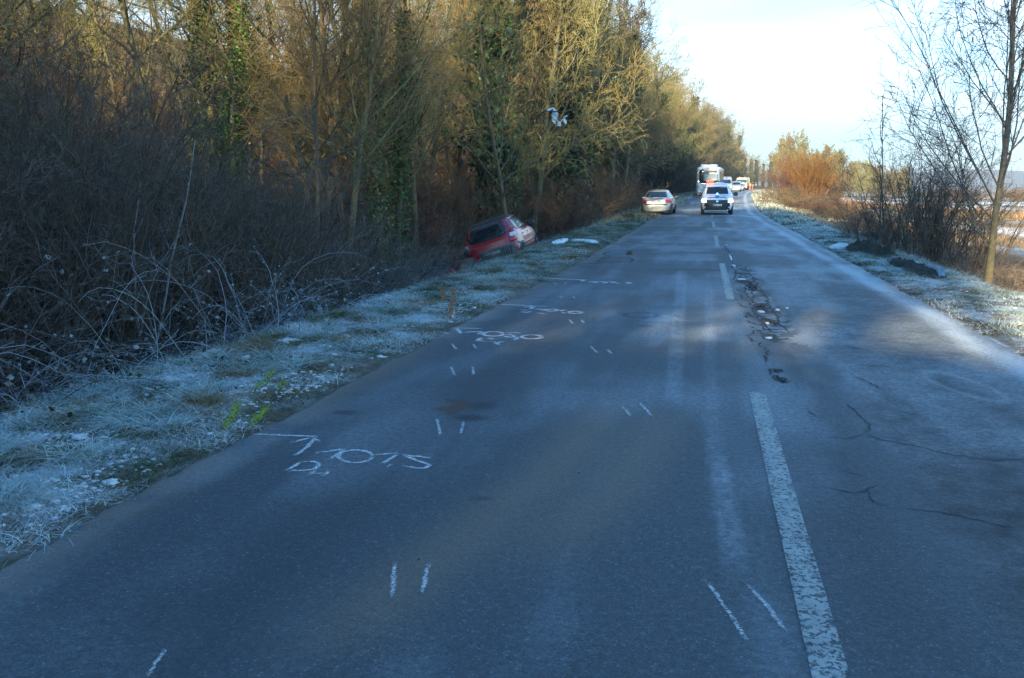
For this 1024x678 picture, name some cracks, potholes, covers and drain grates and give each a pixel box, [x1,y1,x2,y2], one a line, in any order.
crack [835,403,1022,460]
crack [826,470,1024,528]
